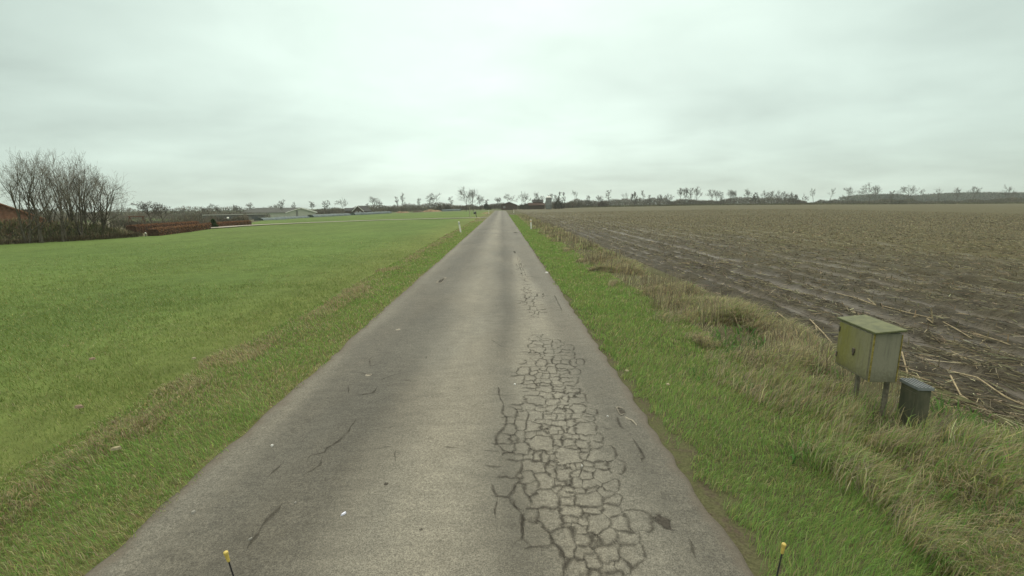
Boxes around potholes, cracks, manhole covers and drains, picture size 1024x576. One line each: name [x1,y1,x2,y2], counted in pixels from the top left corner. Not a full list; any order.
pothole [653,514,671,530]
crack [487,268,653,576]
